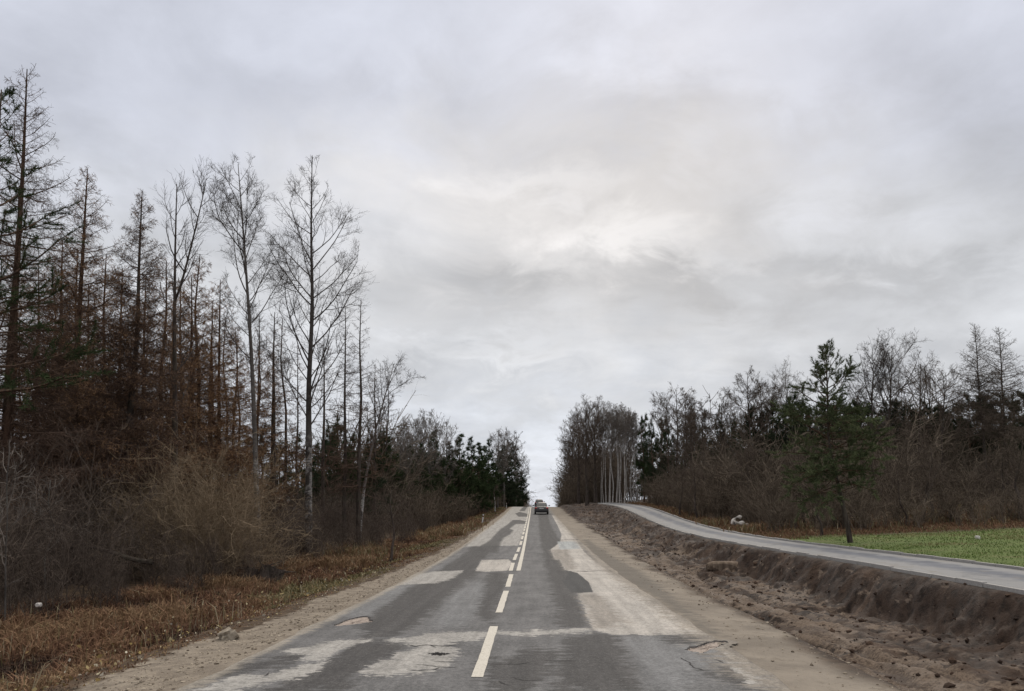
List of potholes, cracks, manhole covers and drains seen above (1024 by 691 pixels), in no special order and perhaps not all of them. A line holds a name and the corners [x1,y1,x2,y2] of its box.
pothole [326,615,381,627]
pothole [674,639,737,655]
